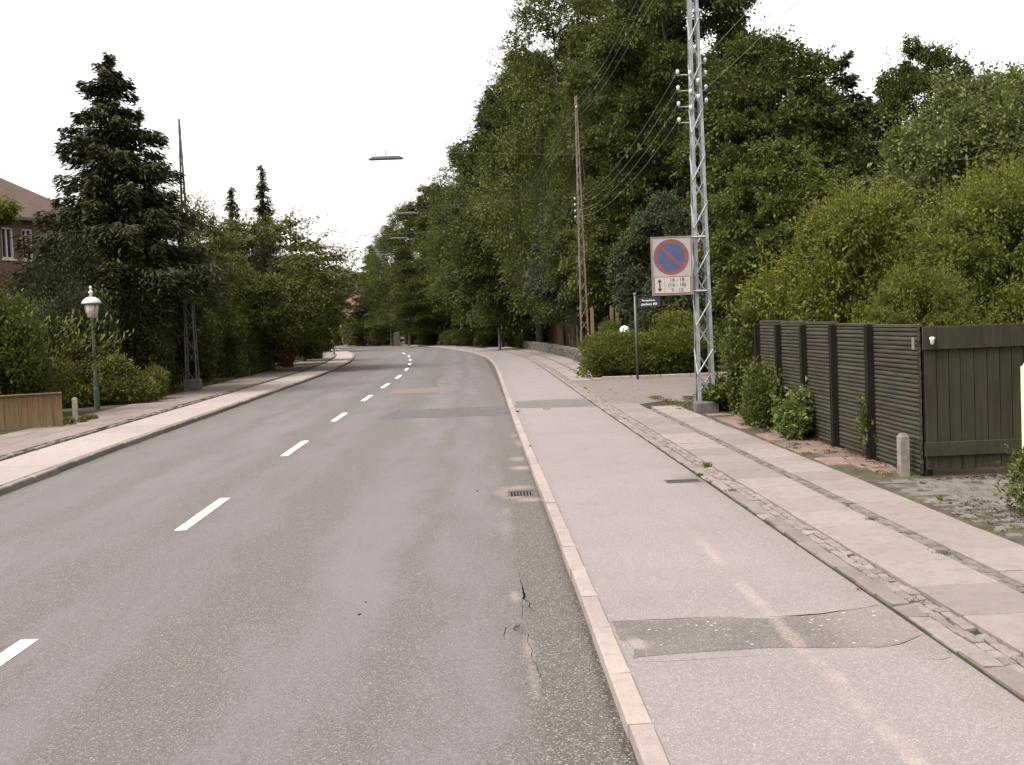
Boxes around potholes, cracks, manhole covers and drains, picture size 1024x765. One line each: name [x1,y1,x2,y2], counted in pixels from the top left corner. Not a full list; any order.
crack [504,568,543,681]
